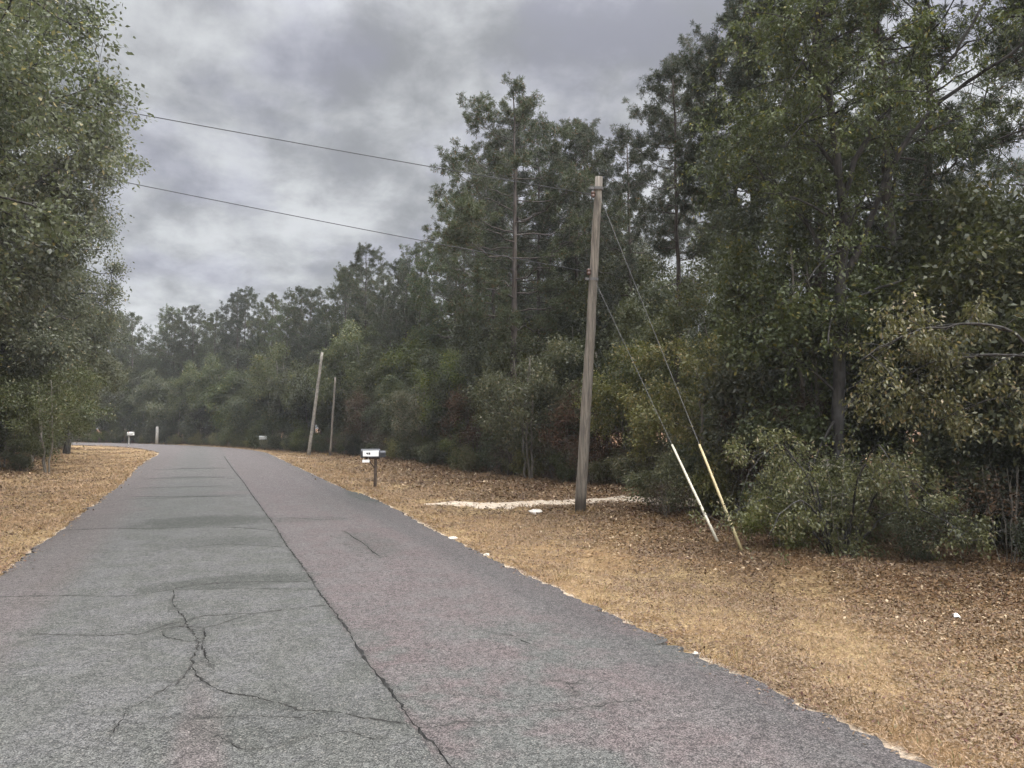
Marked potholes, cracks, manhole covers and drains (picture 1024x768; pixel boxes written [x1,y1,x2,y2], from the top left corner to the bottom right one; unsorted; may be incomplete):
crack [419,721,486,729]
crack [4,581,412,749]
